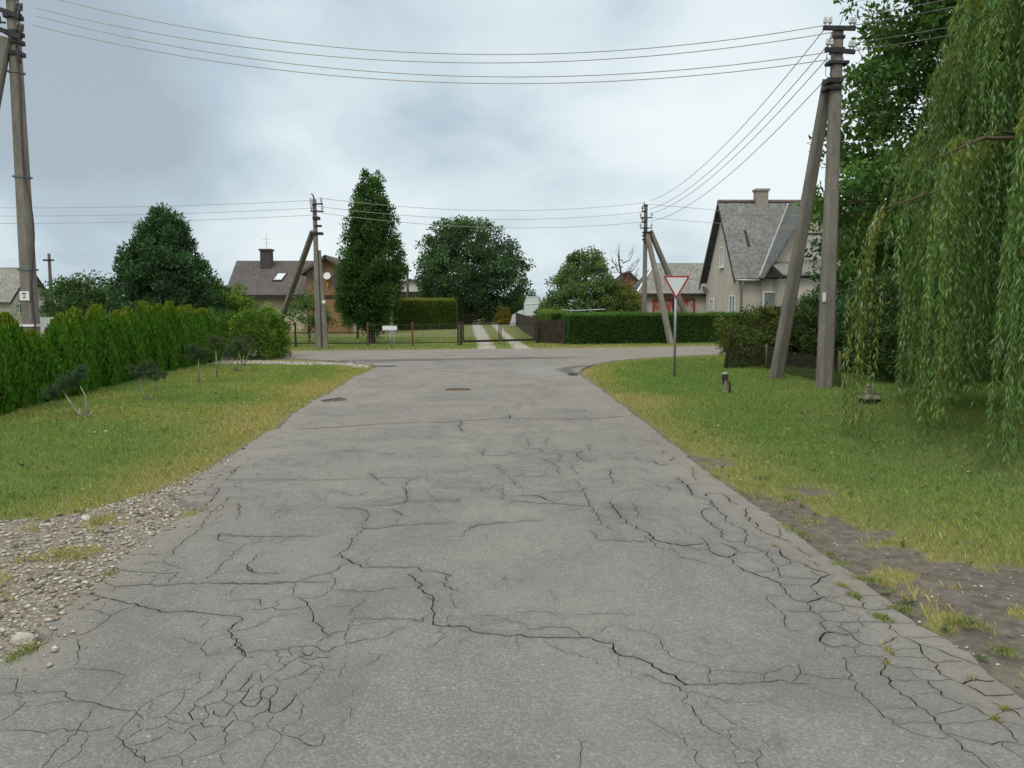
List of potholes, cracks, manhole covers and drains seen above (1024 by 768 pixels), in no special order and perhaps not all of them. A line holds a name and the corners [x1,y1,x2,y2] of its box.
crack [0,441,1024,768]
crack [314,415,621,430]
